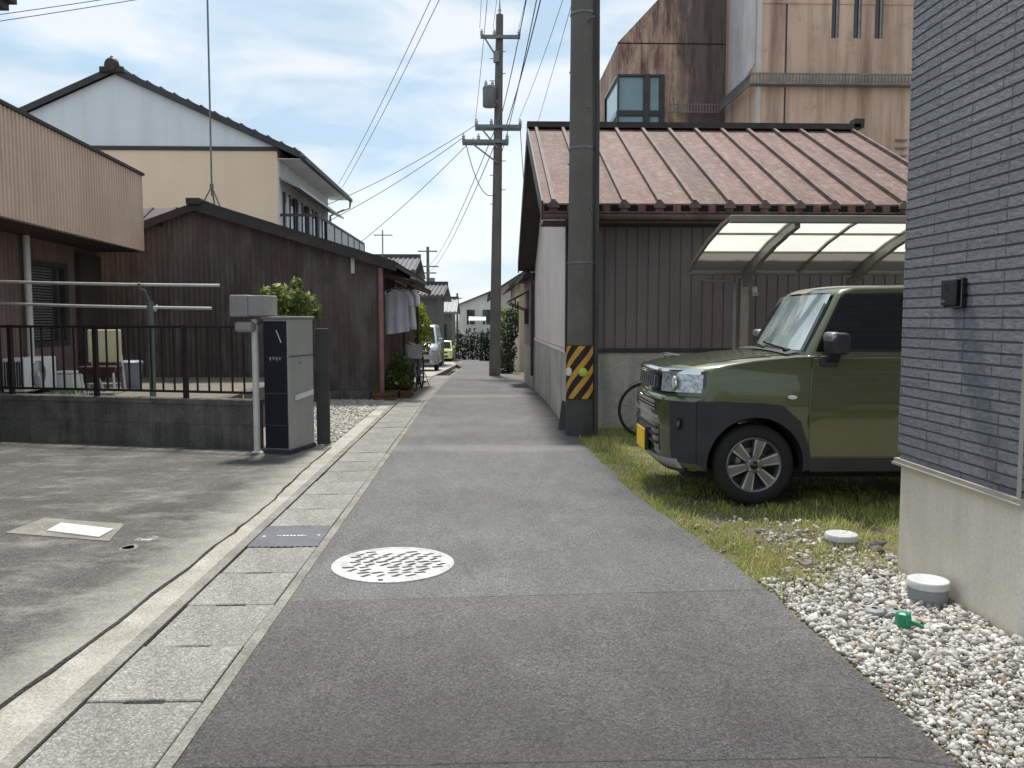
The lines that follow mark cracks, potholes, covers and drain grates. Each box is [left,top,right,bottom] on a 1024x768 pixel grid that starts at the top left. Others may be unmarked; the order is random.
manhole cover [247,526,332,548]
manhole cover [331,547,454,583]
